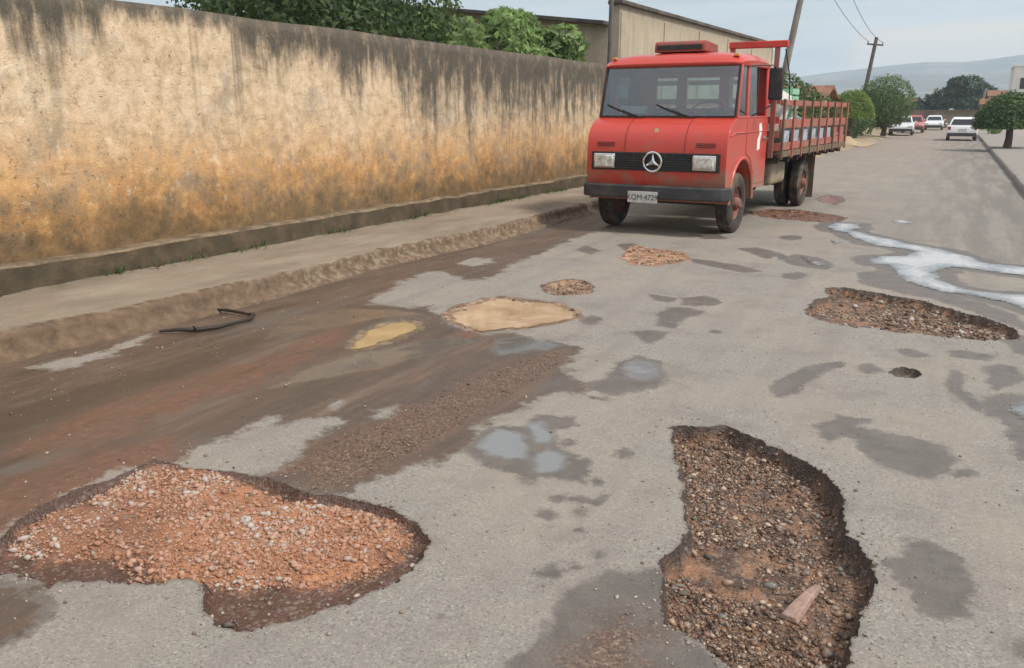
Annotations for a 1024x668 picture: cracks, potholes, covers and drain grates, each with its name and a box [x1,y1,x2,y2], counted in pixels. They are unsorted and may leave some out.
pothole [540,279,595,296]
pothole [0,460,431,632]
pothole [888,366,921,379]
pothole [804,287,1021,341]
pothole [816,194,845,205]
pothole [657,425,878,668]
pothole [621,245,691,266]
pothole [745,209,848,222]
pothole [343,319,425,351]
